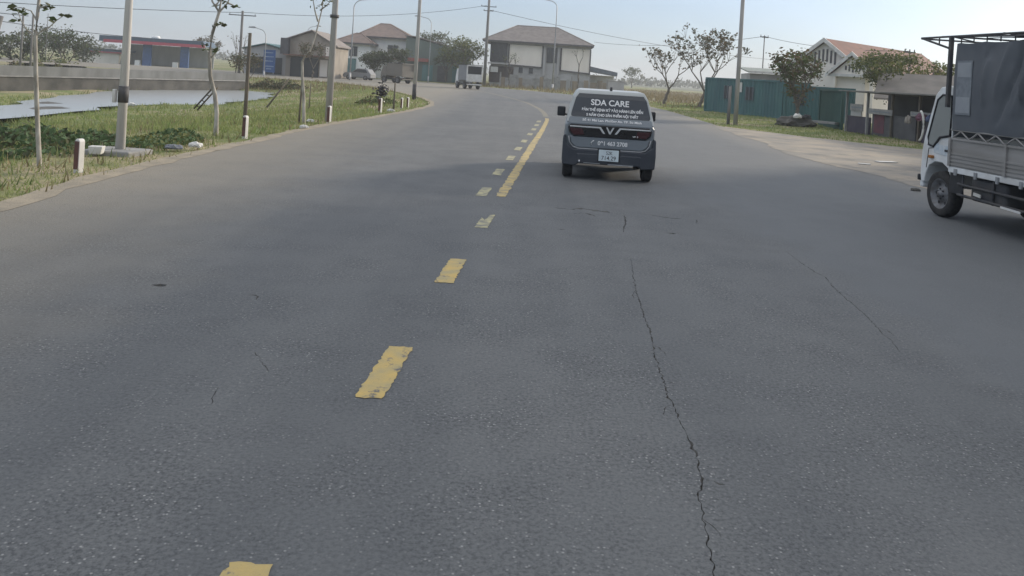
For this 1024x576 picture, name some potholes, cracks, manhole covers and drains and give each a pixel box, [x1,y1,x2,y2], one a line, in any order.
crack [555,207,627,232]
crack [630,259,725,576]
